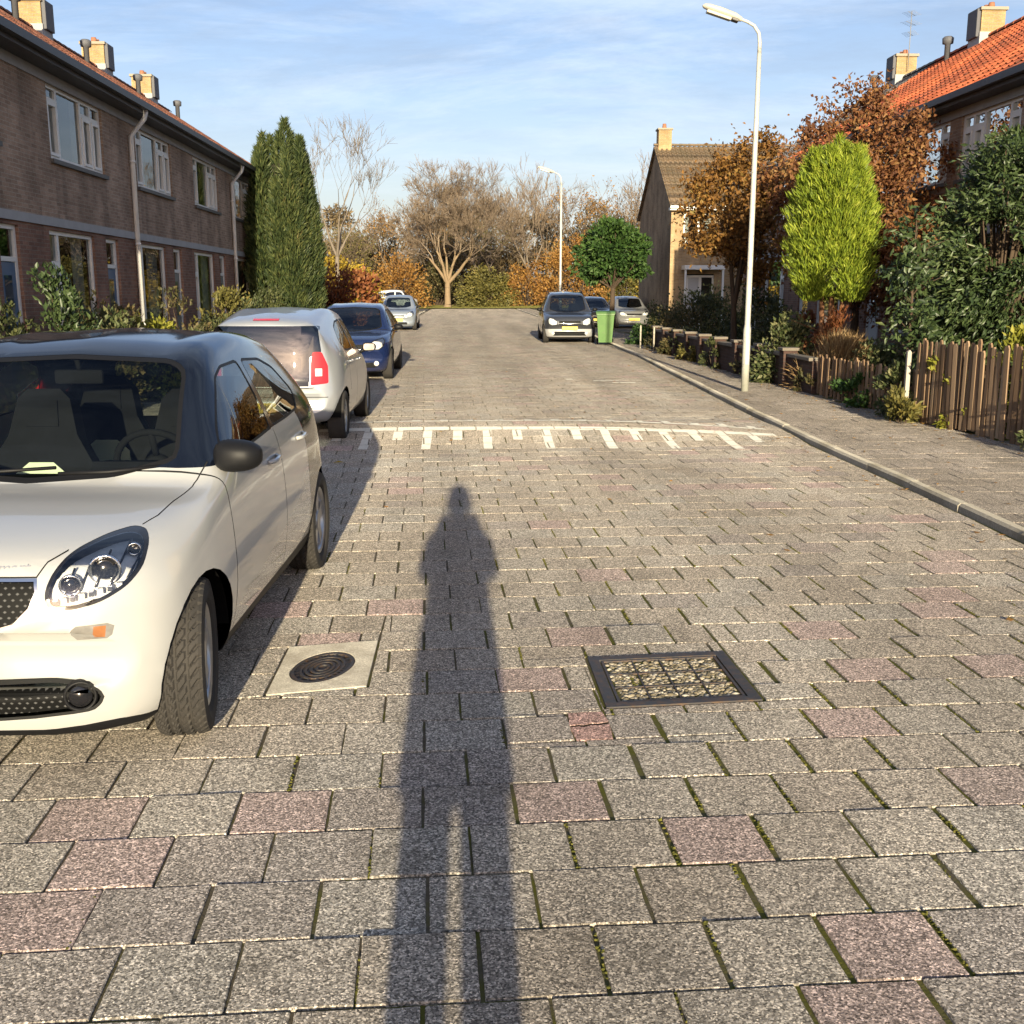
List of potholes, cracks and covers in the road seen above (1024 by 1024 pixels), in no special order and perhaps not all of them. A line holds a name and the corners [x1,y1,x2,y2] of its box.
manhole cover [266,640,378,697]
